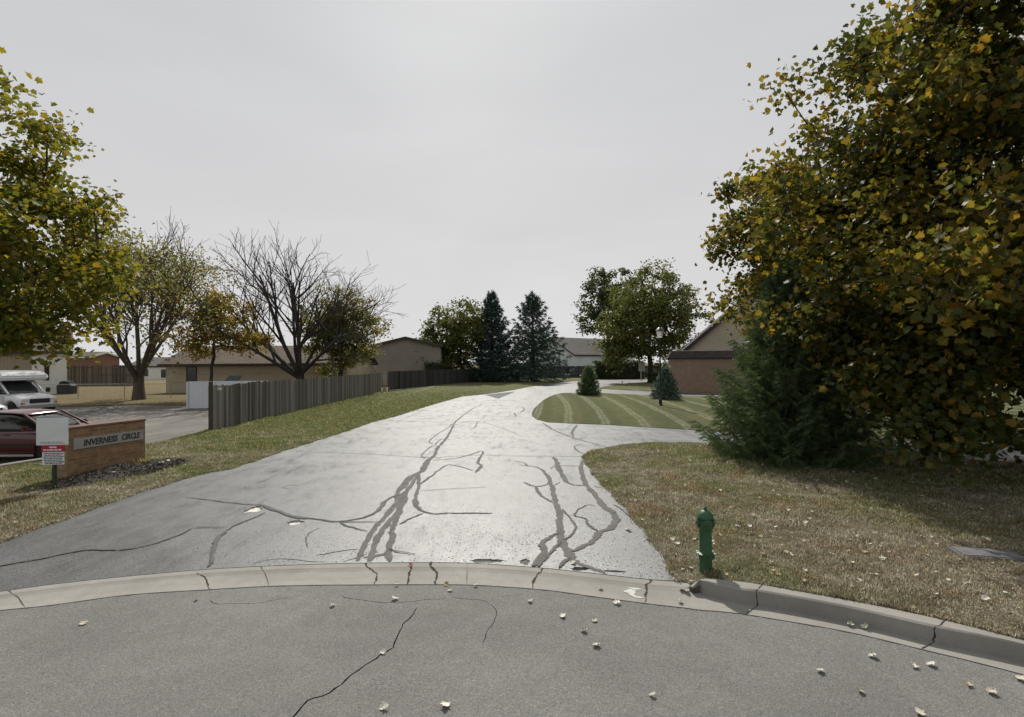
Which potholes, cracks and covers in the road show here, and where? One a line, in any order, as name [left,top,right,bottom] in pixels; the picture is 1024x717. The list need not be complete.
crack [293,563,543,717]
